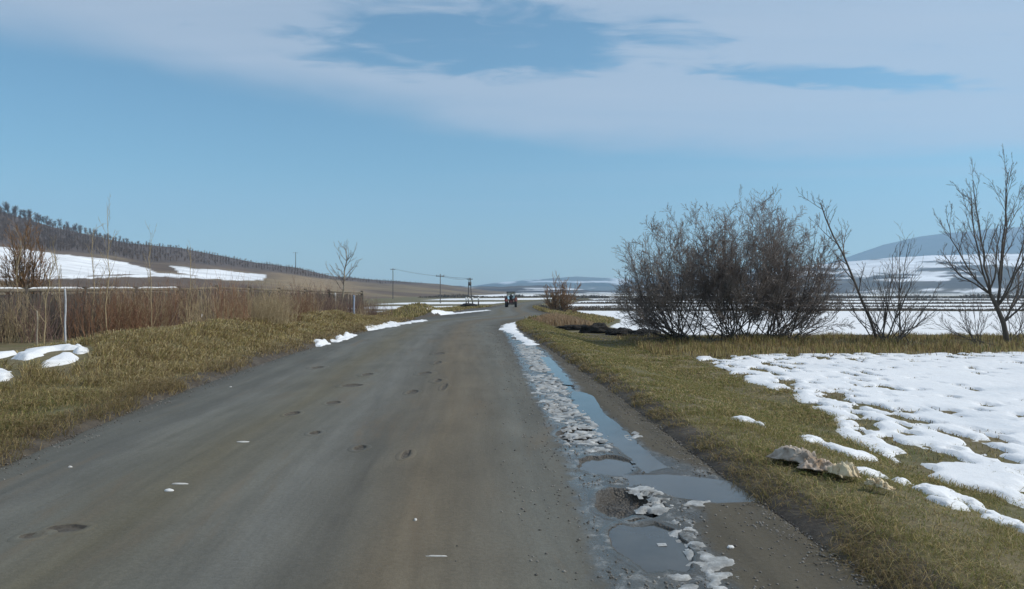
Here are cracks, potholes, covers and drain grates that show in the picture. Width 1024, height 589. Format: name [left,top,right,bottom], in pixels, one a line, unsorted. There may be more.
pothole [587,485,678,527]
pothole [395,448,417,461]
pothole [571,453,642,478]
pothole [7,529,58,543]
pothole [347,444,372,453]
